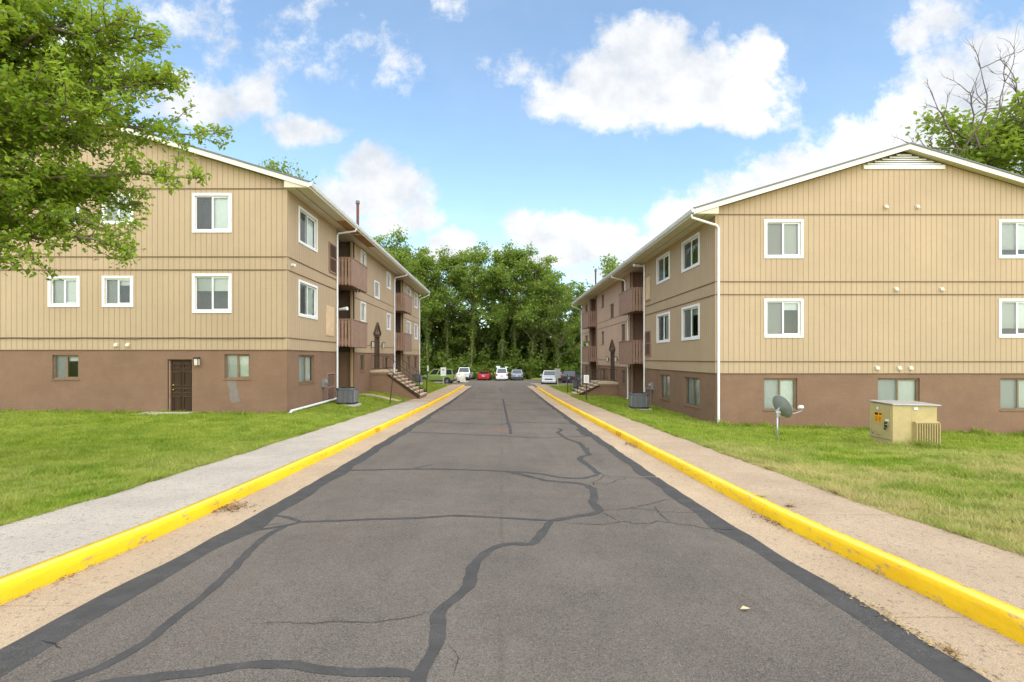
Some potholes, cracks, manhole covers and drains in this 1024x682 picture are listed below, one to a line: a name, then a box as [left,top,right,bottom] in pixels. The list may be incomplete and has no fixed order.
crack [580,499,726,534]
